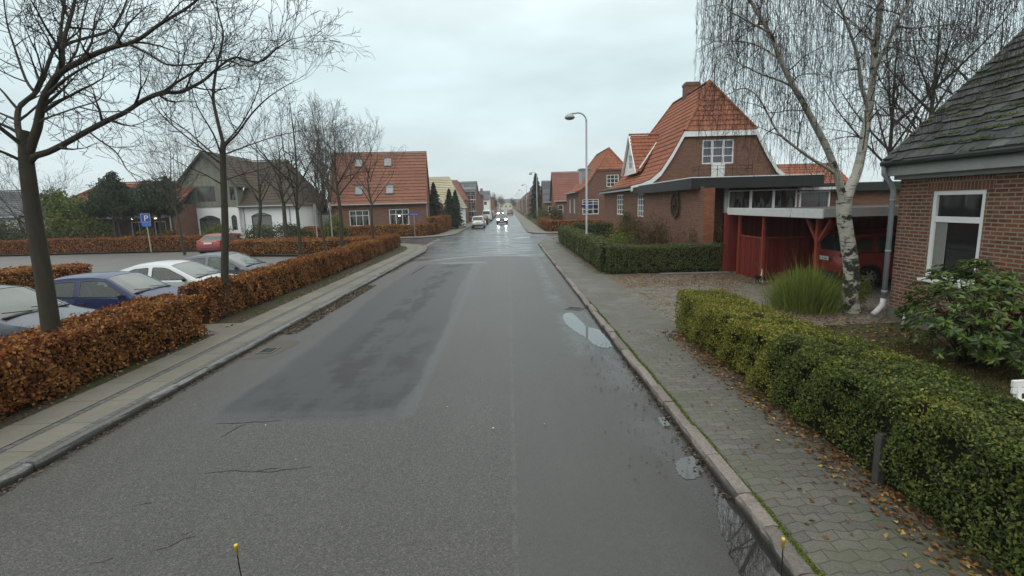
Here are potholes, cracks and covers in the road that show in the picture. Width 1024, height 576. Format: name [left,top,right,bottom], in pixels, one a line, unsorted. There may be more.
crack [204,466,311,474]
